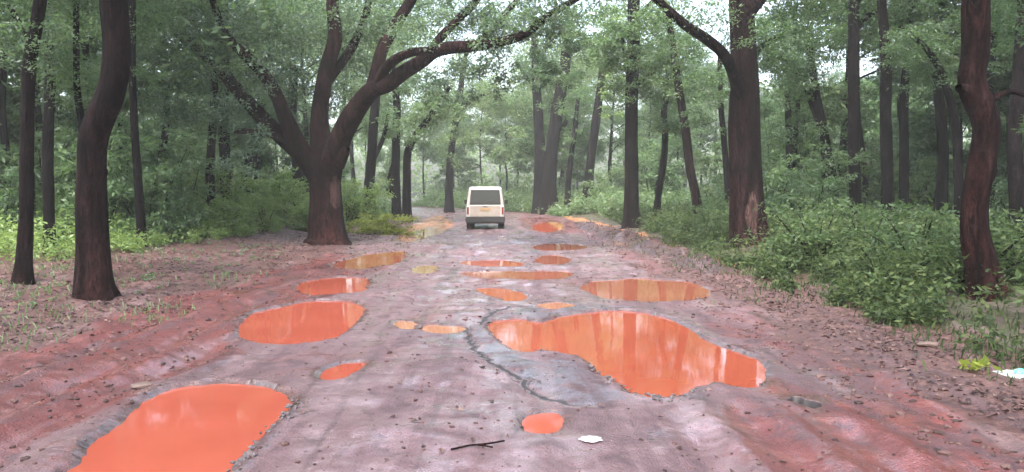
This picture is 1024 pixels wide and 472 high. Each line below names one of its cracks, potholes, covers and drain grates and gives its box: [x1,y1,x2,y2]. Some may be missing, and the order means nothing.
pothole [457,259,528,267]
pothole [529,243,590,251]
pothole [329,250,409,269]
pothole [390,320,423,330]
pothole [455,270,577,280]
pothole [472,286,532,301]
crack [460,305,598,408]
pothole [53,377,301,472]
pothole [530,222,565,232]
pothole [312,359,372,380]
pothole [231,298,371,344]
pothole [516,409,572,434]
